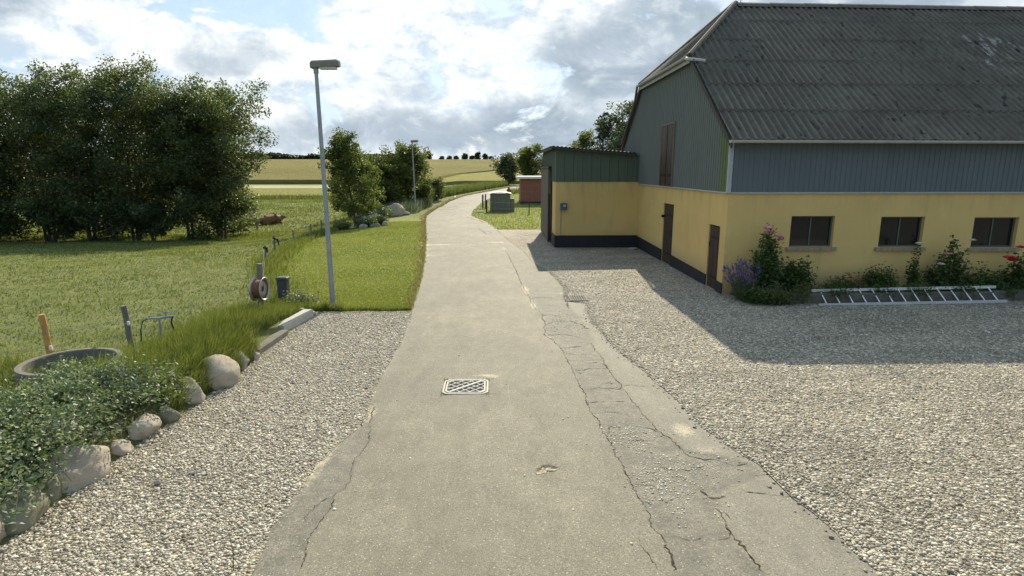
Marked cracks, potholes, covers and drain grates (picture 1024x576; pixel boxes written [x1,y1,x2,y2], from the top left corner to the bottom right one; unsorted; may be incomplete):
crack [300,408,375,569]
drain grate [568,295,588,303]
crack [700,488,766,570]
pothole [535,464,559,475]
